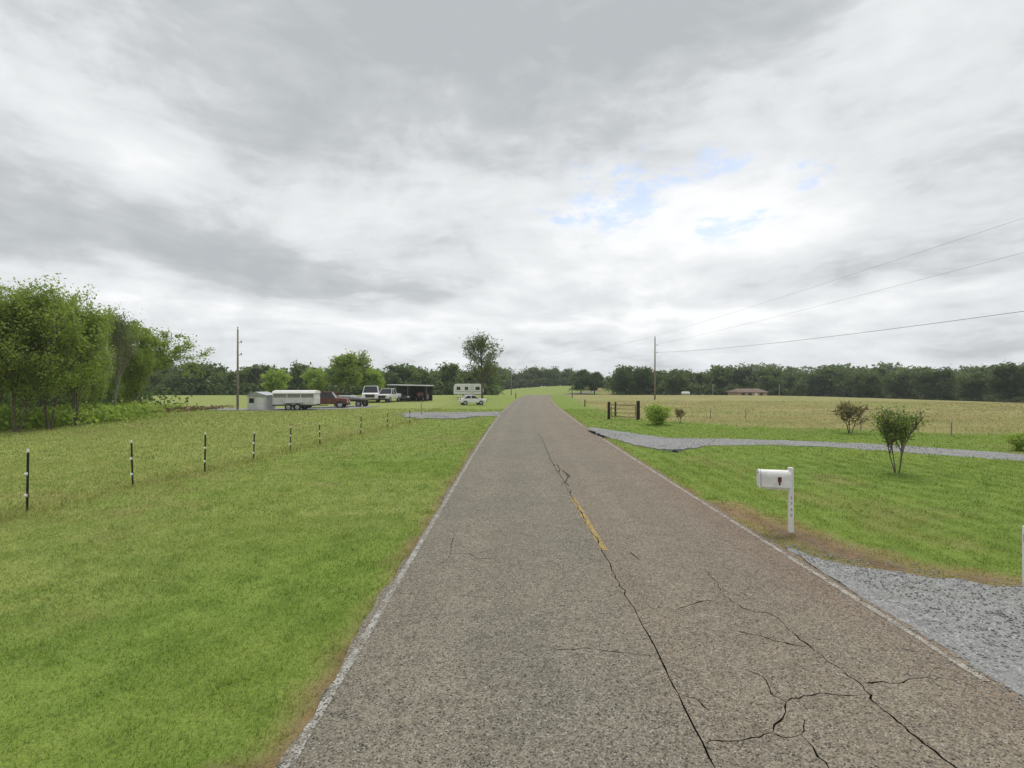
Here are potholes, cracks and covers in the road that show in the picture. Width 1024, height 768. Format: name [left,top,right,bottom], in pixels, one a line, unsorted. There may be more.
crack [540,437,979,768]
